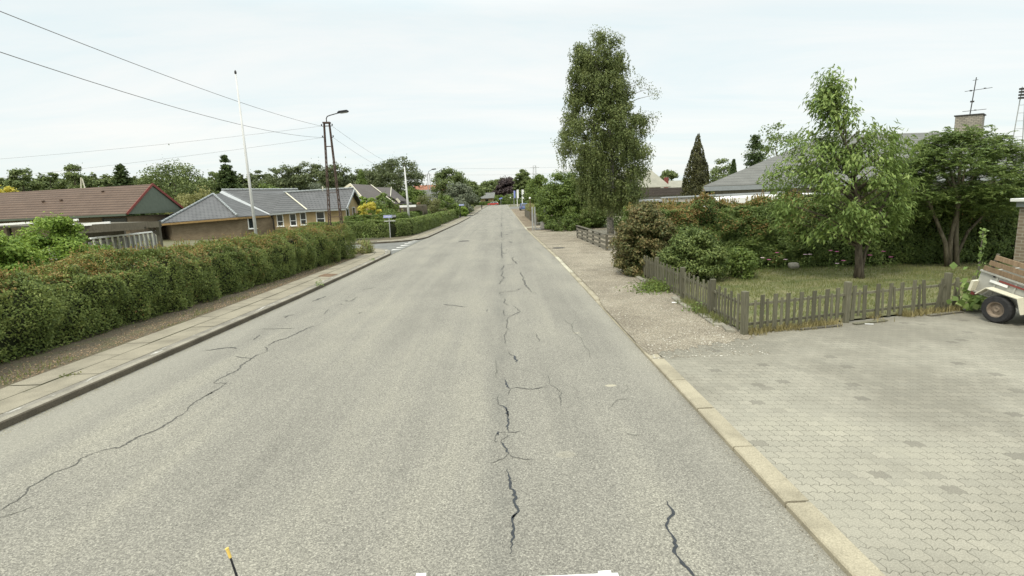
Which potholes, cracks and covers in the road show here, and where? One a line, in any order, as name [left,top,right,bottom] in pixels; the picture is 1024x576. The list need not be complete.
crack [487,217,536,362]
crack [1,314,313,517]
crack [665,501,695,576]
crack [492,375,562,554]
